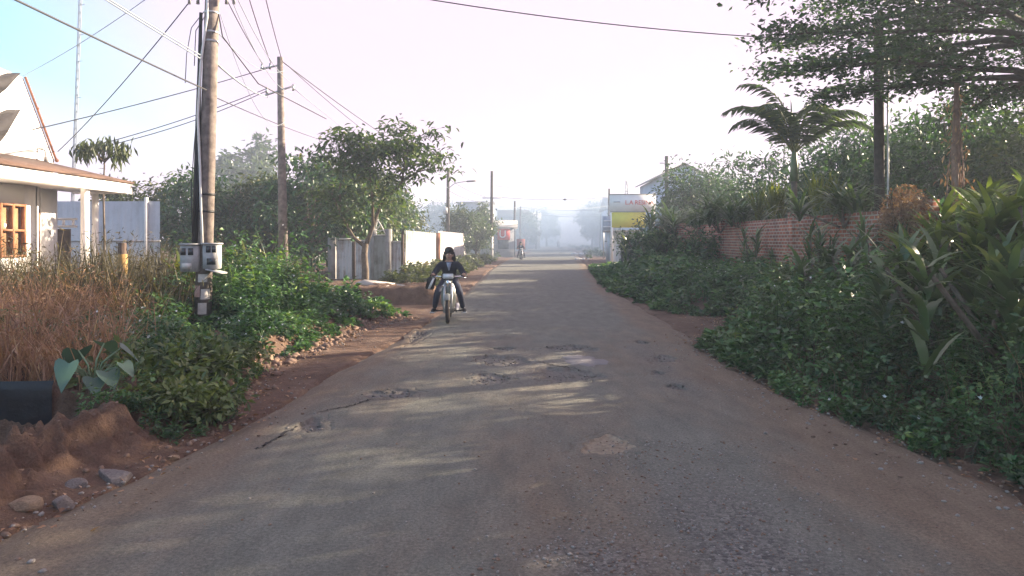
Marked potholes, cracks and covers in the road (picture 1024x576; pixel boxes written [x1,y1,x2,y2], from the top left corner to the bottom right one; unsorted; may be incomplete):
pothole [464,354,539,368]
crack [254,426,298,449]
pothole [352,387,429,401]
pothole [284,411,332,439]
pothole [648,352,685,366]
pothole [654,381,697,394]
pothole [535,343,606,353]
pothole [533,365,618,385]
pothole [465,371,519,388]
